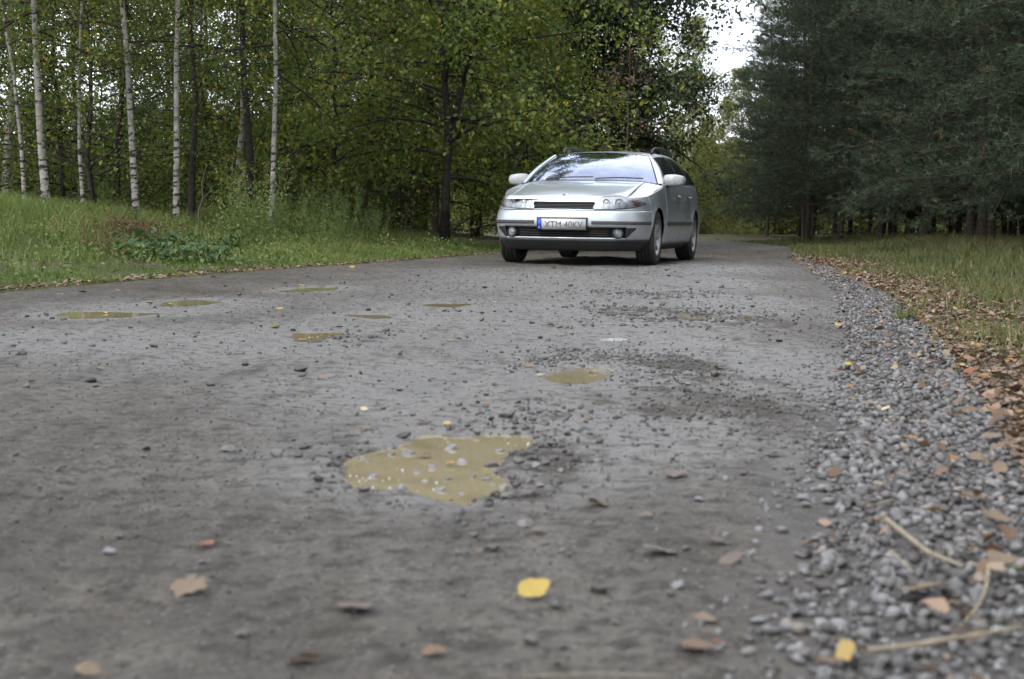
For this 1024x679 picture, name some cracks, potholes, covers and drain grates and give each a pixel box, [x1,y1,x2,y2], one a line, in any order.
pothole [156,299,224,307]
pothole [329,429,544,506]
pothole [52,311,161,319]
pothole [285,331,346,342]
pothole [540,364,622,384]
